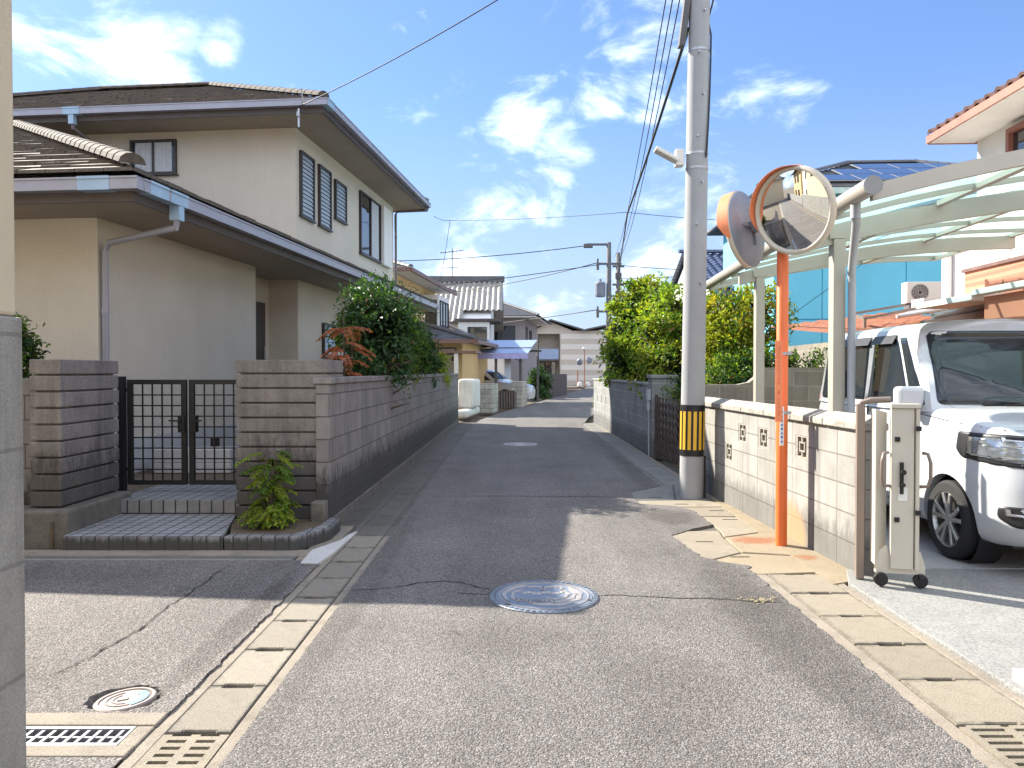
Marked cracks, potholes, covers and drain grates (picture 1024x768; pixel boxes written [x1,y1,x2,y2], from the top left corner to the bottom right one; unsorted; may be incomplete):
manhole cover [93,687,157,713]
drain grate [132,735,229,768]
manhole cover [489,580,599,614]
crack [340,581,491,595]
drain grate [959,725,1024,768]
drain grate [26,726,137,746]
crack [619,594,766,602]
